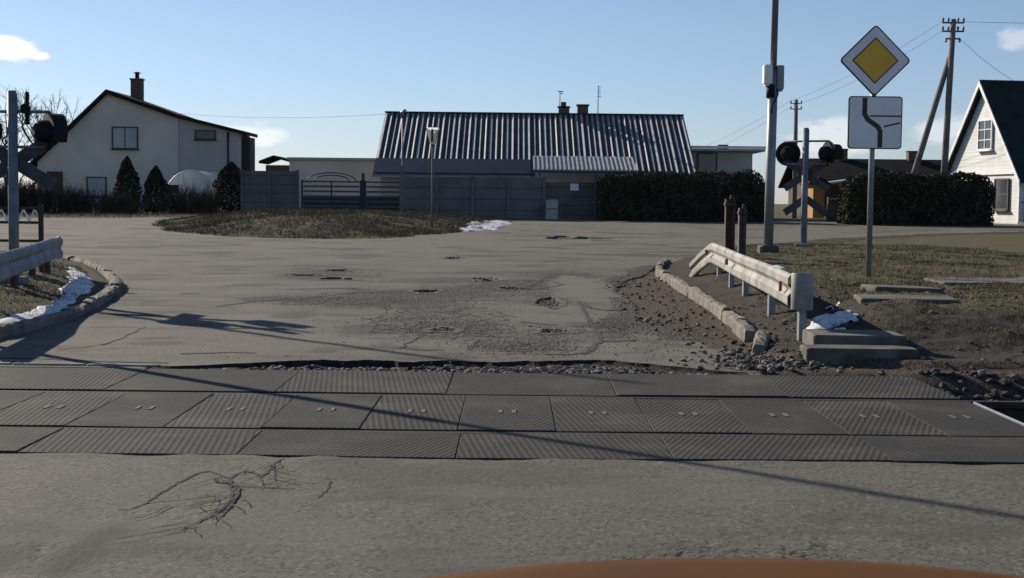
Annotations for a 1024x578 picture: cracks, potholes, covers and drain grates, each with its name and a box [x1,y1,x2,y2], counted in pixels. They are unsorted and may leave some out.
crack [117,458,305,539]
pothole [527,296,568,308]
